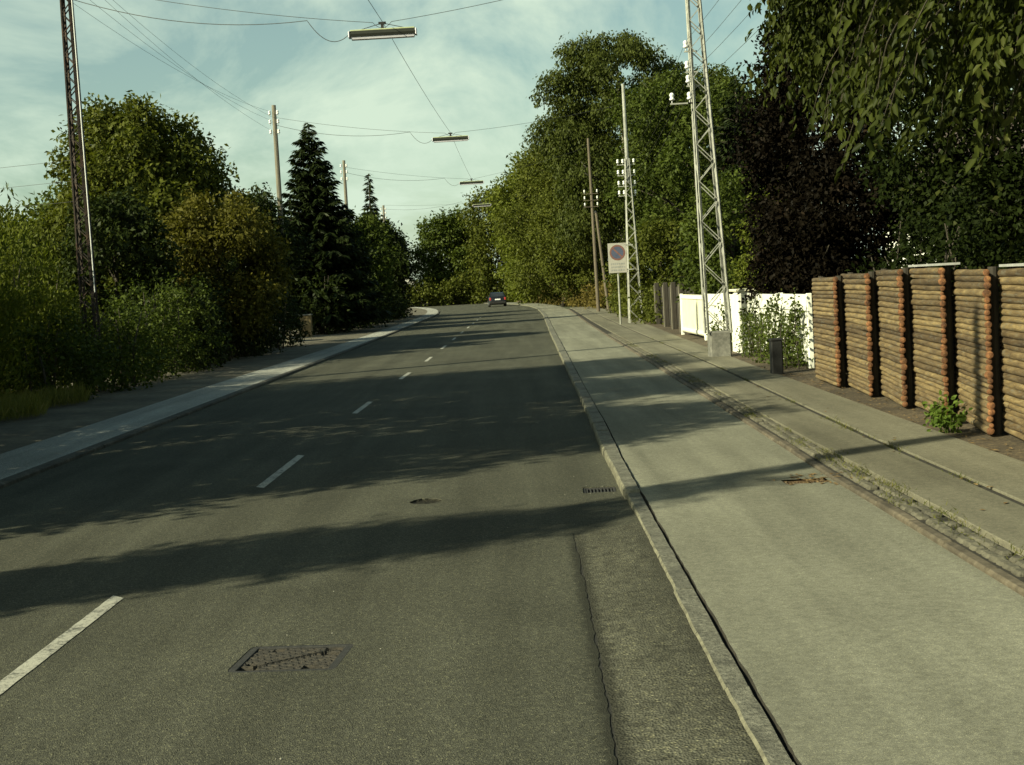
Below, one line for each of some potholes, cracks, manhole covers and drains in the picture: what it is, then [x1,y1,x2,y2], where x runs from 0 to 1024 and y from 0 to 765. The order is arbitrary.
manhole cover [228,644,353,673]
